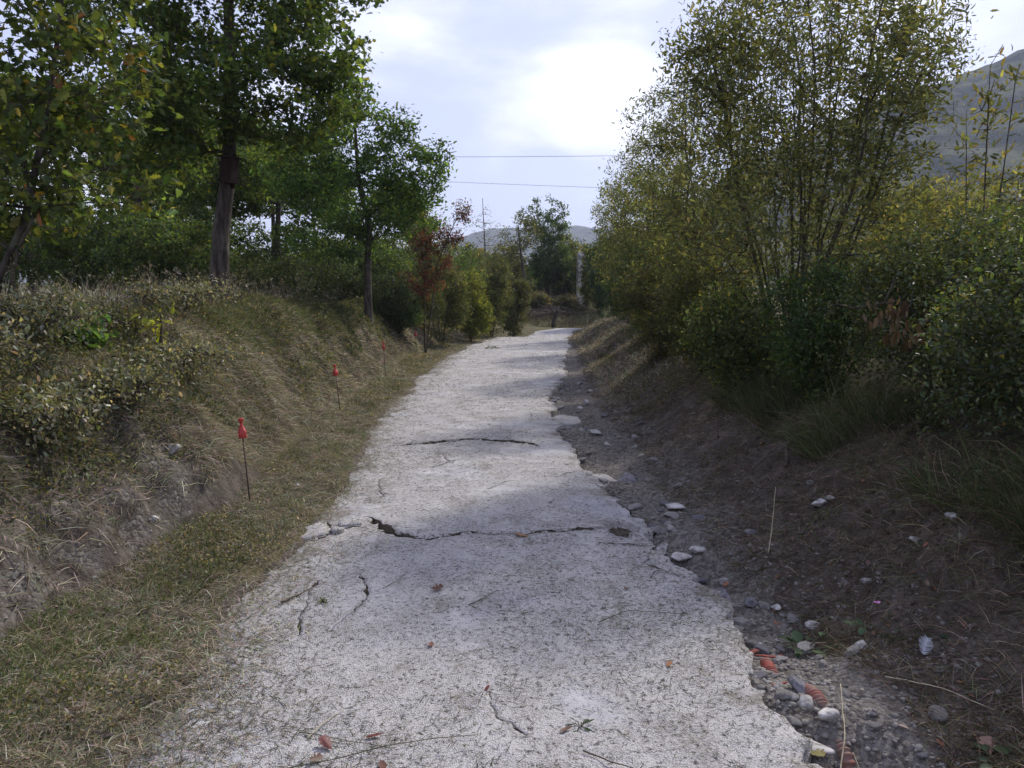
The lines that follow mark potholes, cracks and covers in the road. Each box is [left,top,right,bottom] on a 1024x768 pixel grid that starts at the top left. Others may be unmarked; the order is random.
crack [405,438,539,467]
crack [307,516,602,543]
crack [293,574,373,635]
crack [375,478,386,497]
crack [484,693,530,737]
